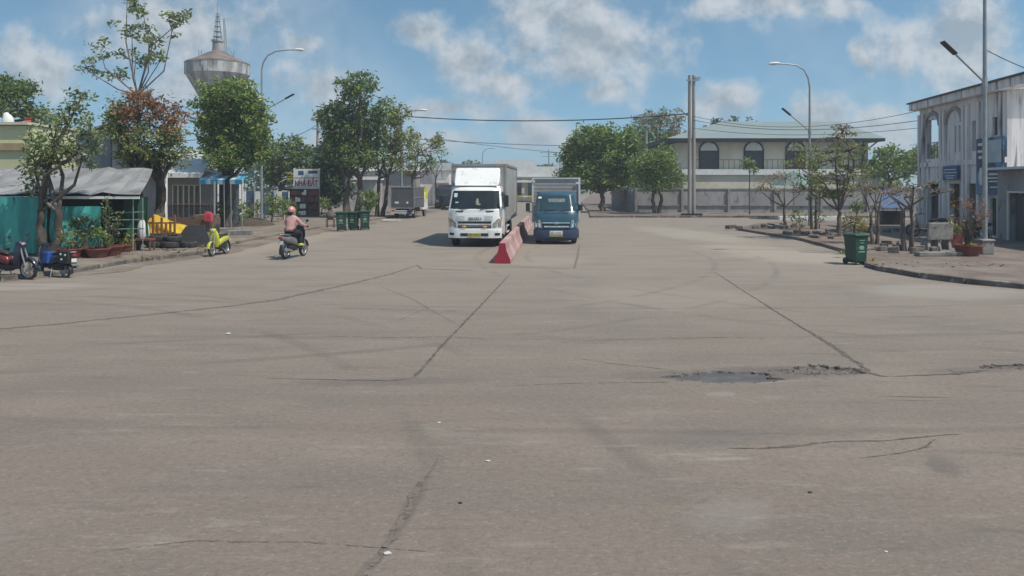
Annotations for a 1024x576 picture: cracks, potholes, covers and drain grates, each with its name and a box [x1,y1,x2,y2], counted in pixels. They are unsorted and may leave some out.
pothole [654,370,784,383]
crack [750,434,952,458]
crack [106,458,438,576]
